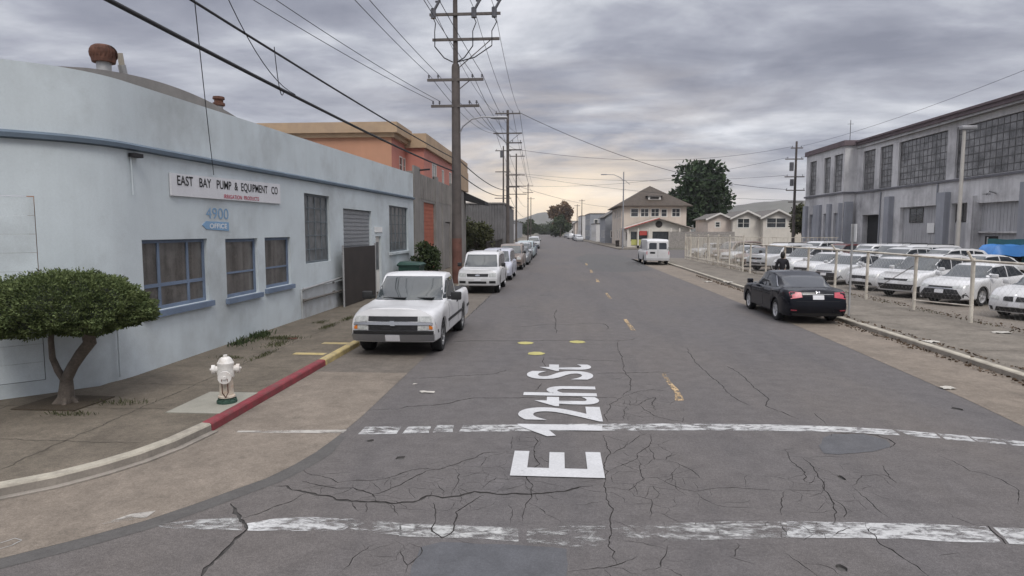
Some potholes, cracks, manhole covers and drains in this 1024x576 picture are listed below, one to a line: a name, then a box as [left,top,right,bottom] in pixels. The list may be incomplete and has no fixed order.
crack [688,352,792,417]
crack [376,310,688,423]
crack [575,432,928,576]
crack [286,432,608,575]
